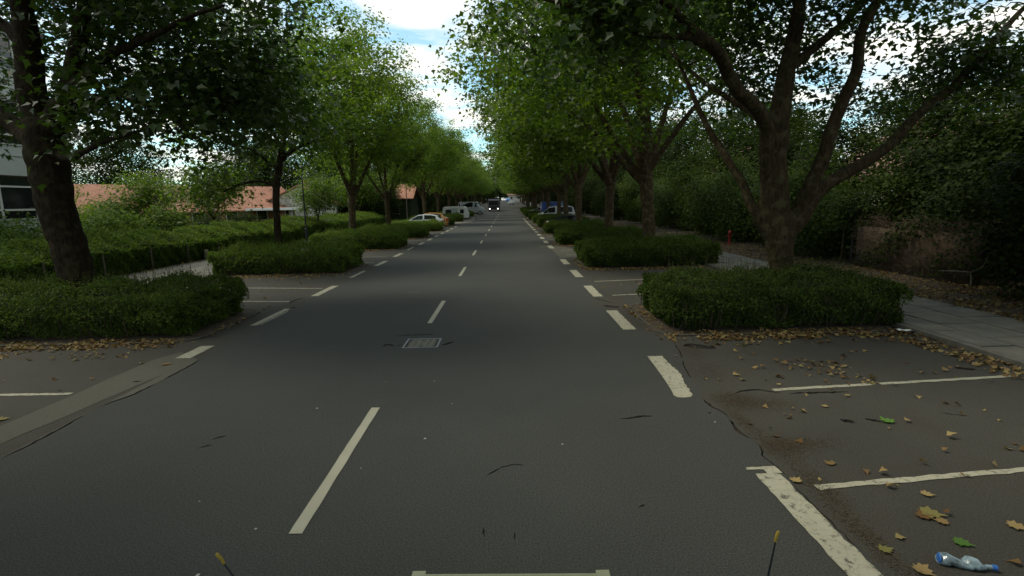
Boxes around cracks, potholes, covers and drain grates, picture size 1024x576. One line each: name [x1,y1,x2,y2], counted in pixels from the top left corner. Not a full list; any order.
crack [704,389,840,416]
